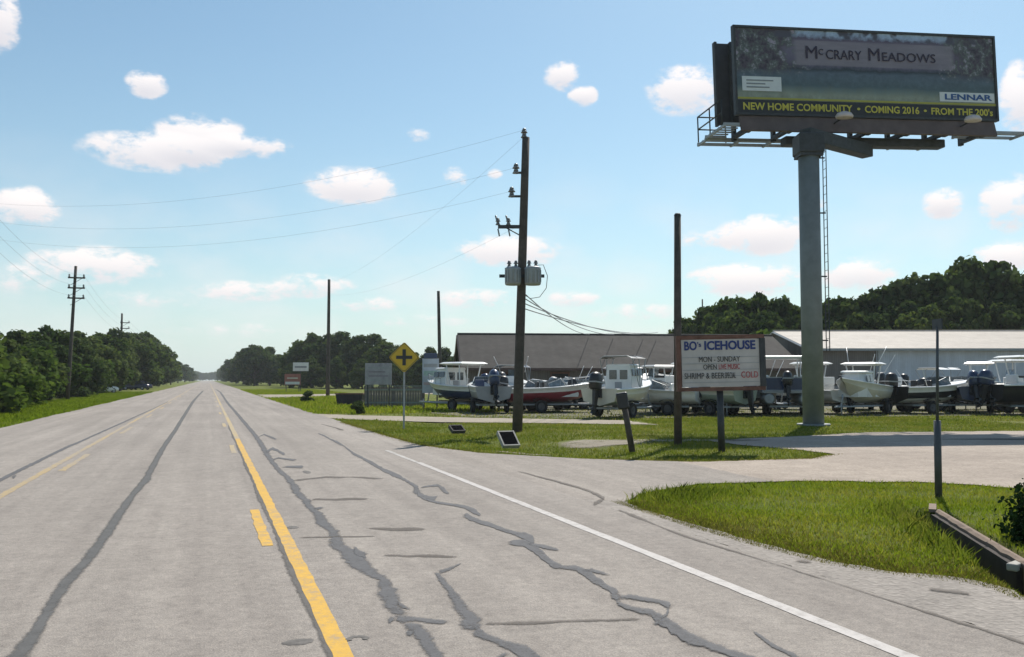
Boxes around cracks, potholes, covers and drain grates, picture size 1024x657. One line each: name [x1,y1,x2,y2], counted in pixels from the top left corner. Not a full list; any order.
crack [519,471,604,505]
crack [316,527,424,537]
